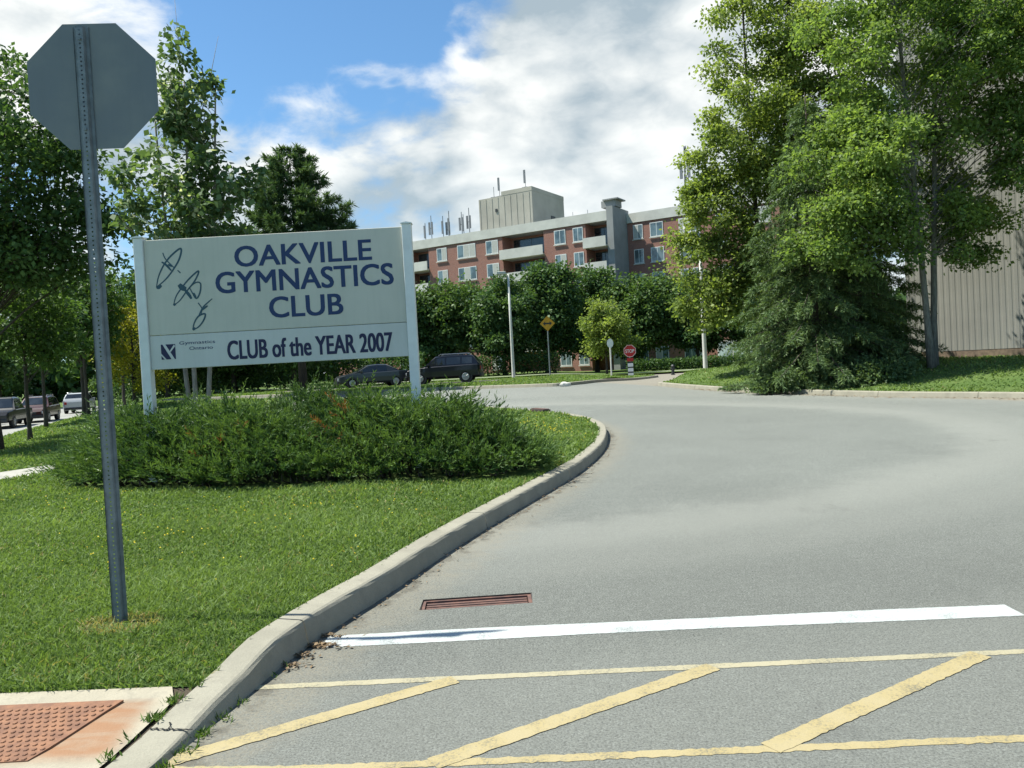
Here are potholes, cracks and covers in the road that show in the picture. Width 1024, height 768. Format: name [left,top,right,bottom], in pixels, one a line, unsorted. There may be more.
drain grate [420,593,533,610]
crack [150,722,192,730]
